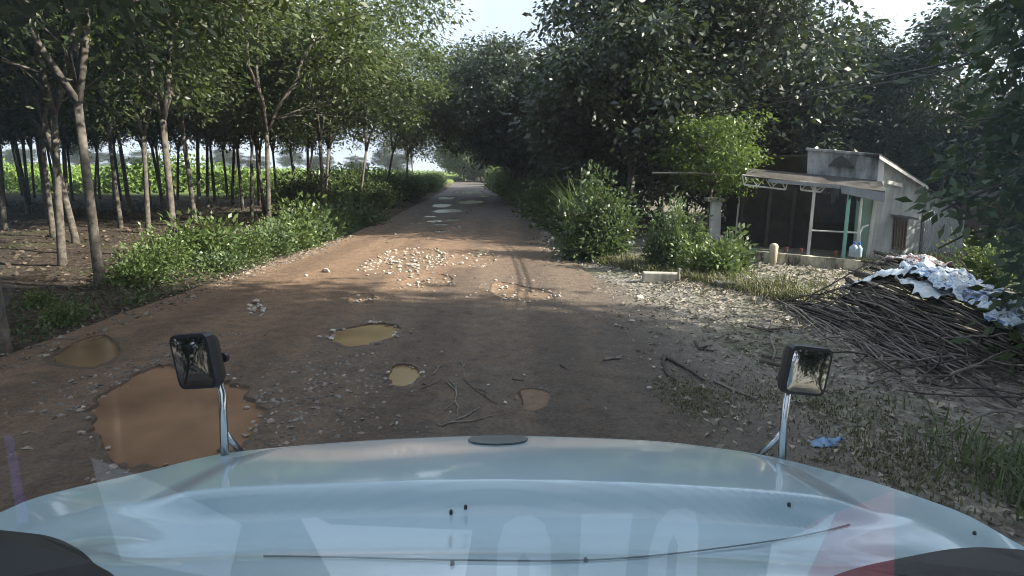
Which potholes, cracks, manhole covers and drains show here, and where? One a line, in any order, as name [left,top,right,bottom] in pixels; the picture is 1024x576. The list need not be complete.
pothole [485,279,562,303]
pothole [383,362,426,389]
pothole [42,334,124,370]
pothole [343,293,378,306]
pothole [318,320,403,348]
pothole [509,387,553,412]
pothole [76,360,276,475]
